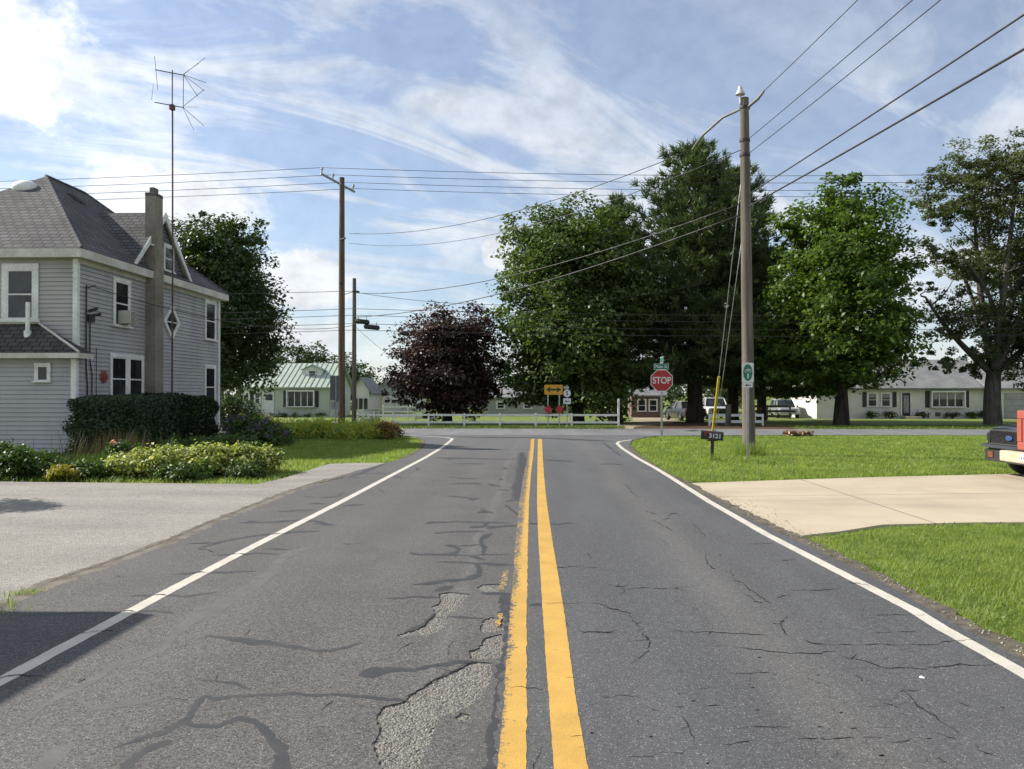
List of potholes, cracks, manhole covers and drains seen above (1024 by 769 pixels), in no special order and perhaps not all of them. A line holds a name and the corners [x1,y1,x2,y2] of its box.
crack [732,726,853,744]
crack [627,706,699,757]
pothole [397,592,469,638]
pothole [480,617,504,633]
pothole [477,584,501,592]
crack [684,555,994,680]
pothole [372,662,492,769]
crack [883,689,957,738]
pothole [469,634,504,659]
